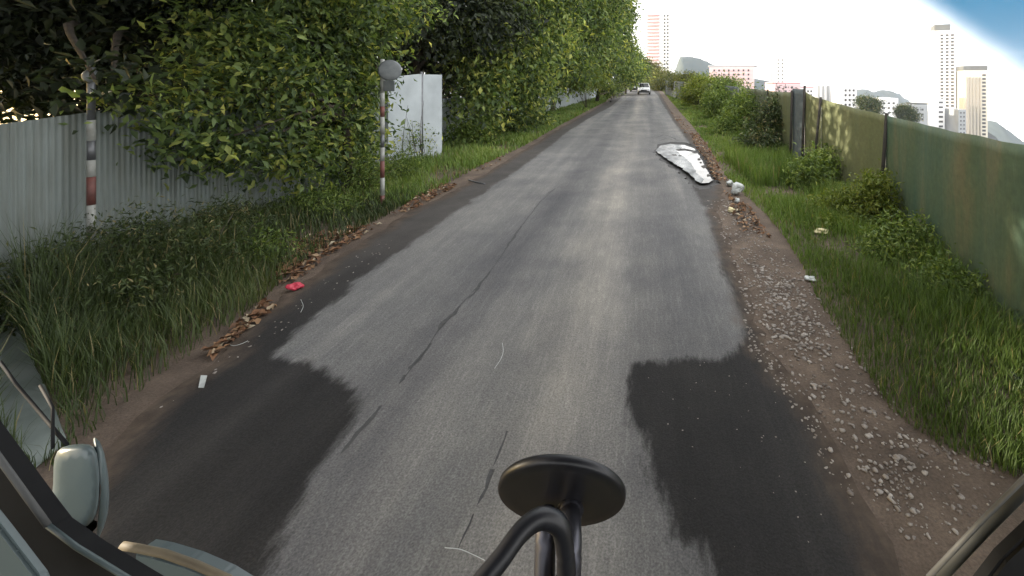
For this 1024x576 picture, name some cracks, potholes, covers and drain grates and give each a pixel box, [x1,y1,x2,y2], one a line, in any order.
crack [341,405,383,453]
crack [399,188,556,384]
crack [458,431,508,548]
